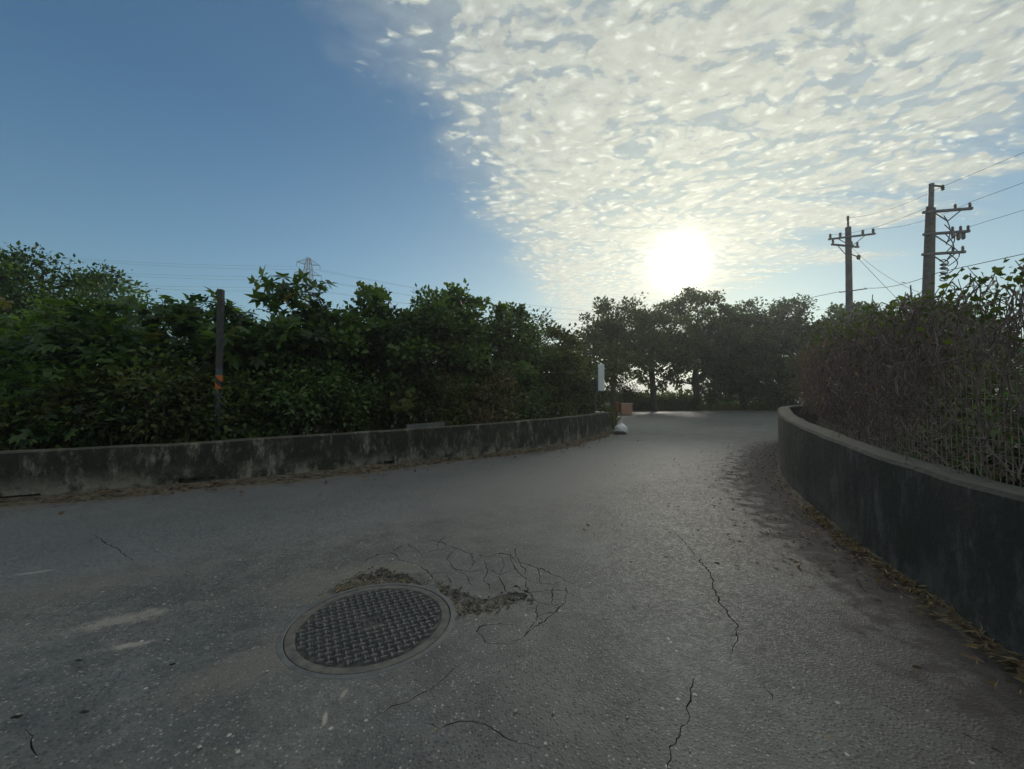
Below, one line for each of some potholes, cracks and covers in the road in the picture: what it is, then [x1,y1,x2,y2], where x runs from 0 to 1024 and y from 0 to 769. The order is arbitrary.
crack [427,721,539,749]
pothole [332,569,422,594]
crack [661,527,739,656]
crack [667,678,694,769]
manhole cover [276,583,455,679]
crack [373,663,463,718]
crack [25,725,38,764]
pothole [438,585,527,615]
crack [366,537,581,644]
